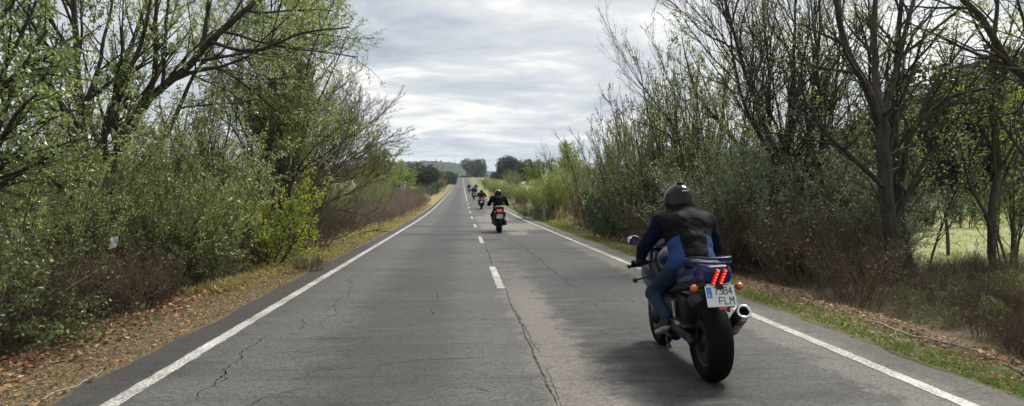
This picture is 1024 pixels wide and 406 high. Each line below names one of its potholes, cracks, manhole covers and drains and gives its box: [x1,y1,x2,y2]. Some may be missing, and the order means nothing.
crack [244,301,619,406]
crack [194,334,272,401]
